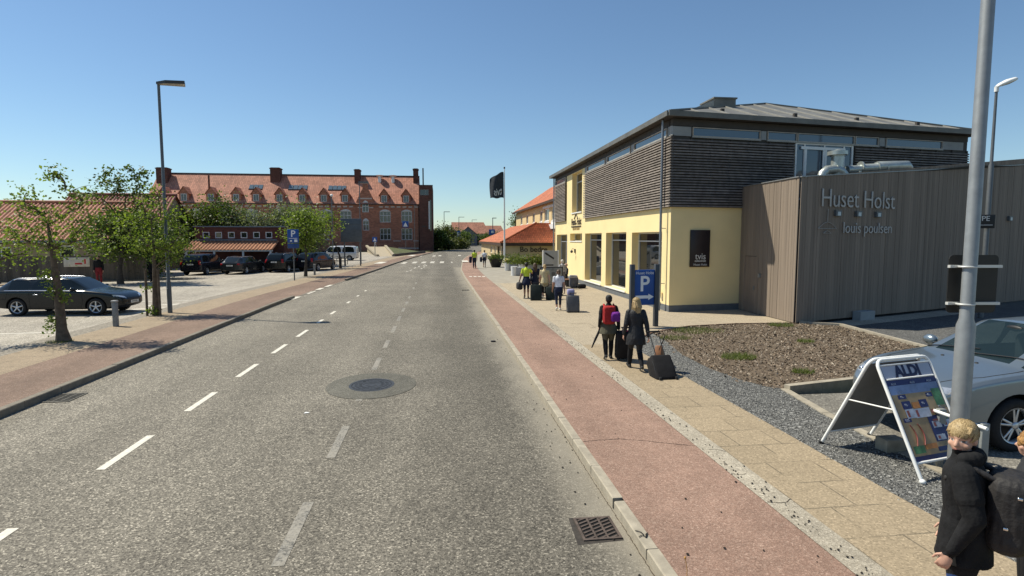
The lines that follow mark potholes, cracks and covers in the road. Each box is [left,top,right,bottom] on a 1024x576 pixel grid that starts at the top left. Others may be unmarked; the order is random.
manhole cover [325,373,416,399]
drain grate [569,516,624,545]
drain grate [40,393,88,403]
